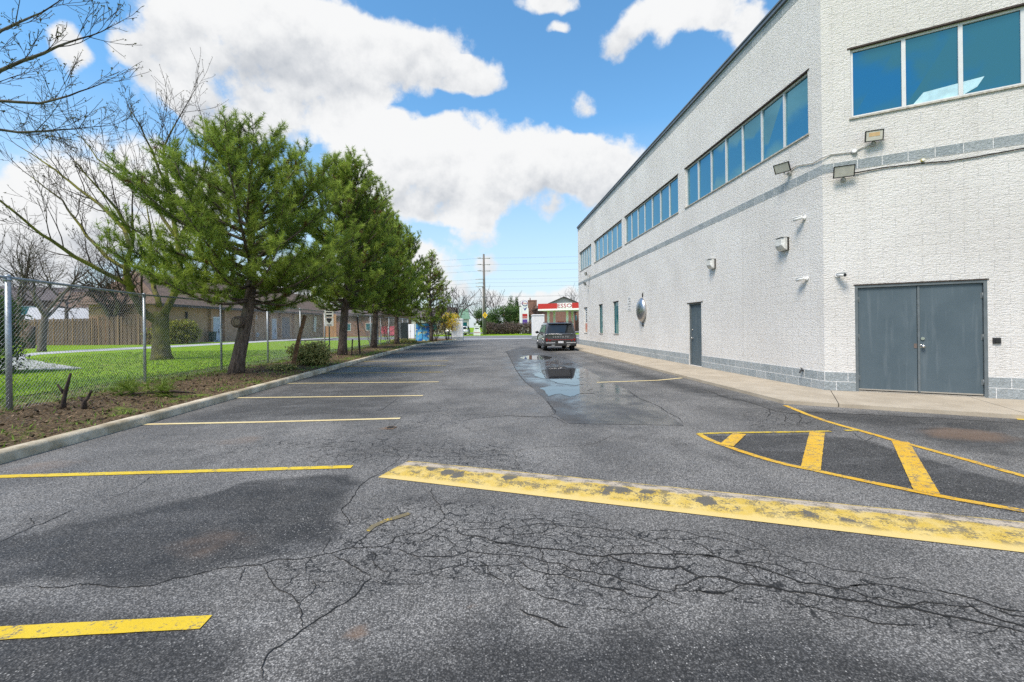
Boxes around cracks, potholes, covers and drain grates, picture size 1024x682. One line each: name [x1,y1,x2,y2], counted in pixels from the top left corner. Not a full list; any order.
crack [16,487,1024,677]
crack [341,446,485,524]
crack [2,479,148,541]
